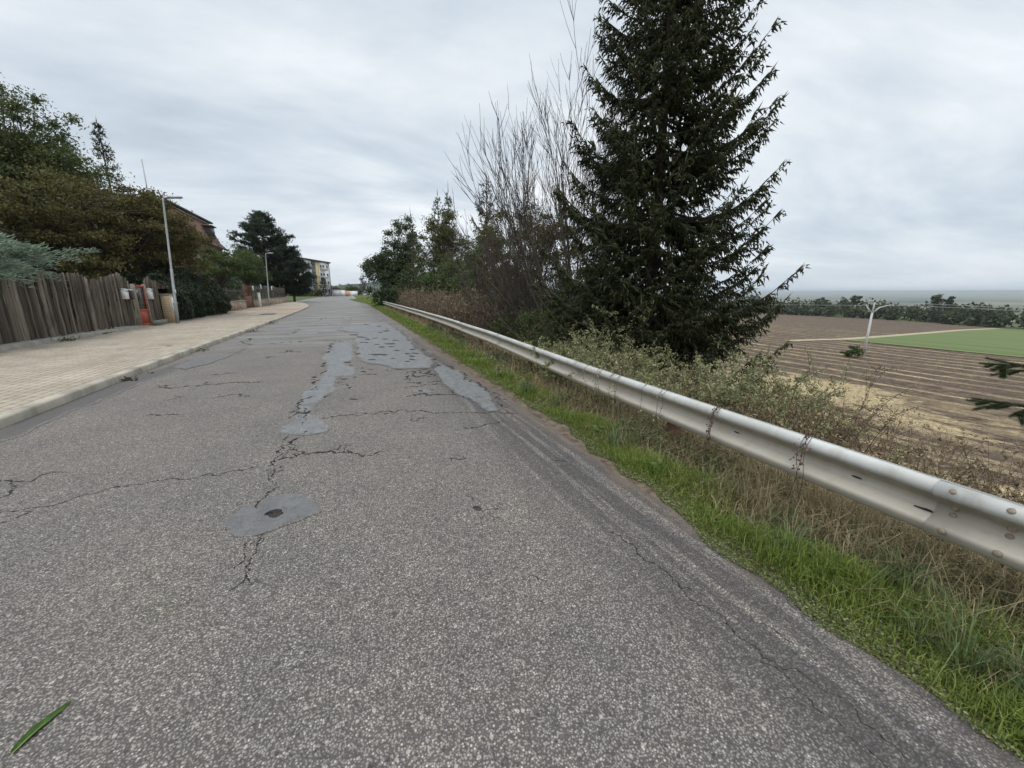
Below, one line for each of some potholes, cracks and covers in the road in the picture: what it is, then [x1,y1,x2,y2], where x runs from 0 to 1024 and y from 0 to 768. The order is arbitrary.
crack [0,329,518,524]
crack [228,534,265,593]
crack [608,532,913,766]
pothole [265,509,284,518]
